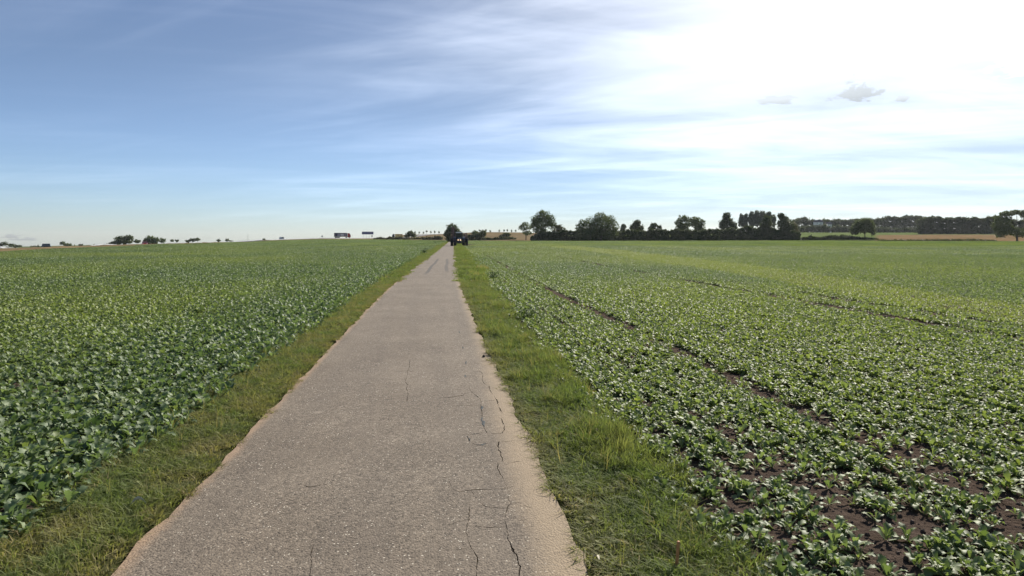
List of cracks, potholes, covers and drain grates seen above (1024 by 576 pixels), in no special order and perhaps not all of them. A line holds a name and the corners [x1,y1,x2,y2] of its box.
crack [442,371,528,576]
